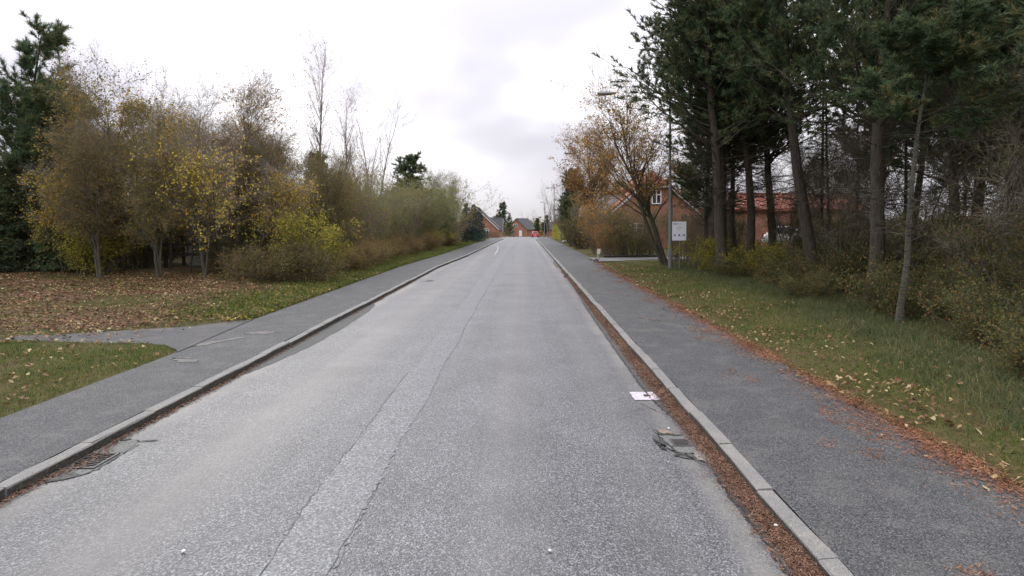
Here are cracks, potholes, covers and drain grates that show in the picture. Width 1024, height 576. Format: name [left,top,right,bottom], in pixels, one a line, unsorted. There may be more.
drain grate [669,439,693,447]
drain grate [64,453,120,469]
